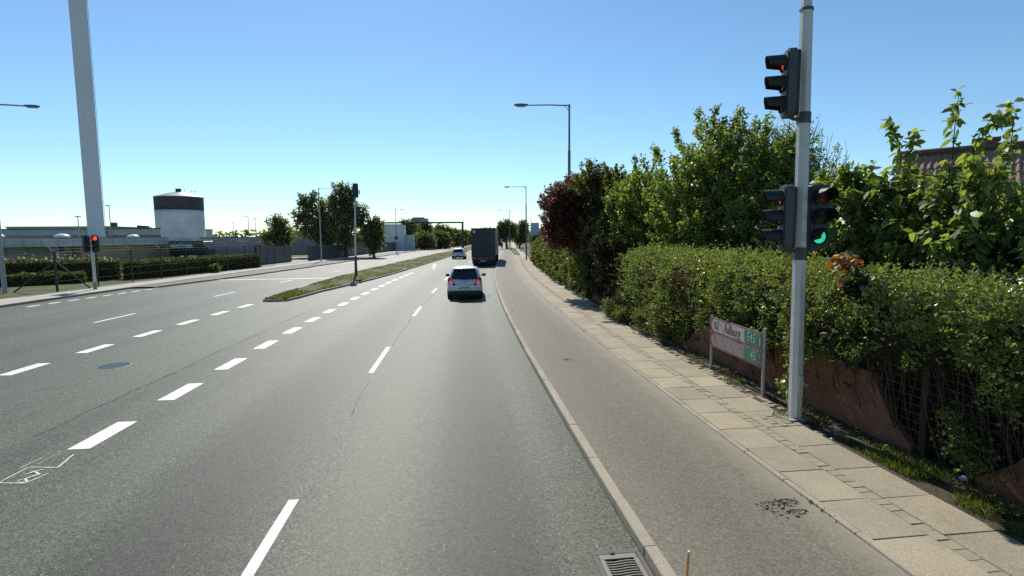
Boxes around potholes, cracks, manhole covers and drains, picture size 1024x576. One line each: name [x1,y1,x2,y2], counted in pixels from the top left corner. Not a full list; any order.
pothole [755,498,810,518]
drain grate [591,548,655,576]
